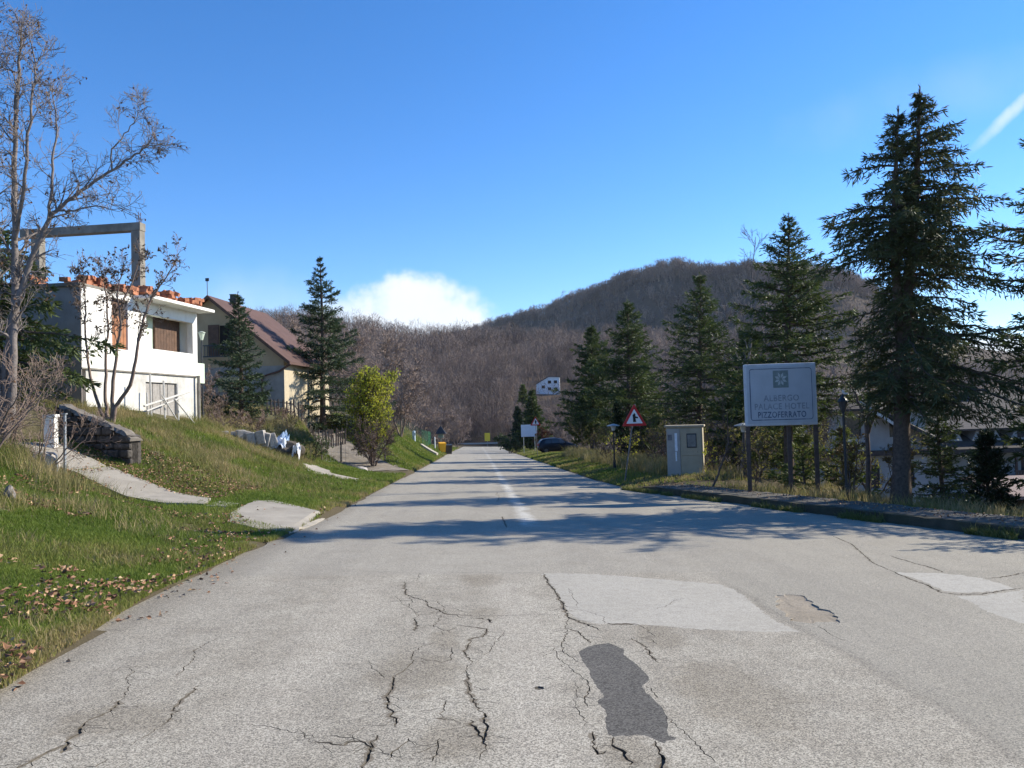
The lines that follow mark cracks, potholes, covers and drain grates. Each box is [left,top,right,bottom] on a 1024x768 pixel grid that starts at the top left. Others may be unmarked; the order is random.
crack [2,666,150,768]
crack [252,573,559,768]
pothole [775,595,840,623]
crack [833,536,1024,595]
crack [537,574,715,768]
crack [131,638,217,745]
